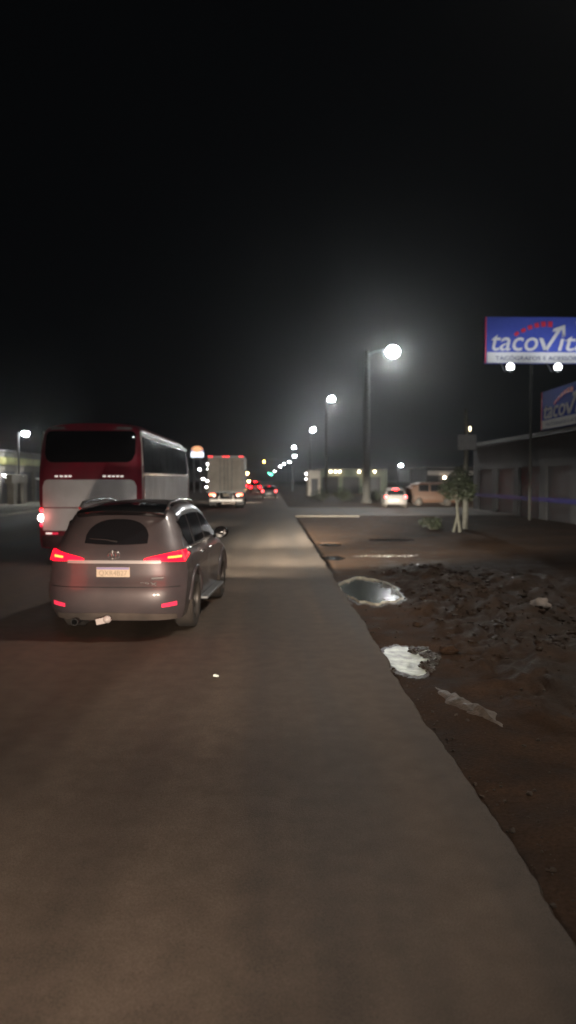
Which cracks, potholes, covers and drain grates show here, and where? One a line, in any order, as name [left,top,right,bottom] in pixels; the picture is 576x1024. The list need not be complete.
pothole [338,577,407,607]
pothole [381,644,442,679]
